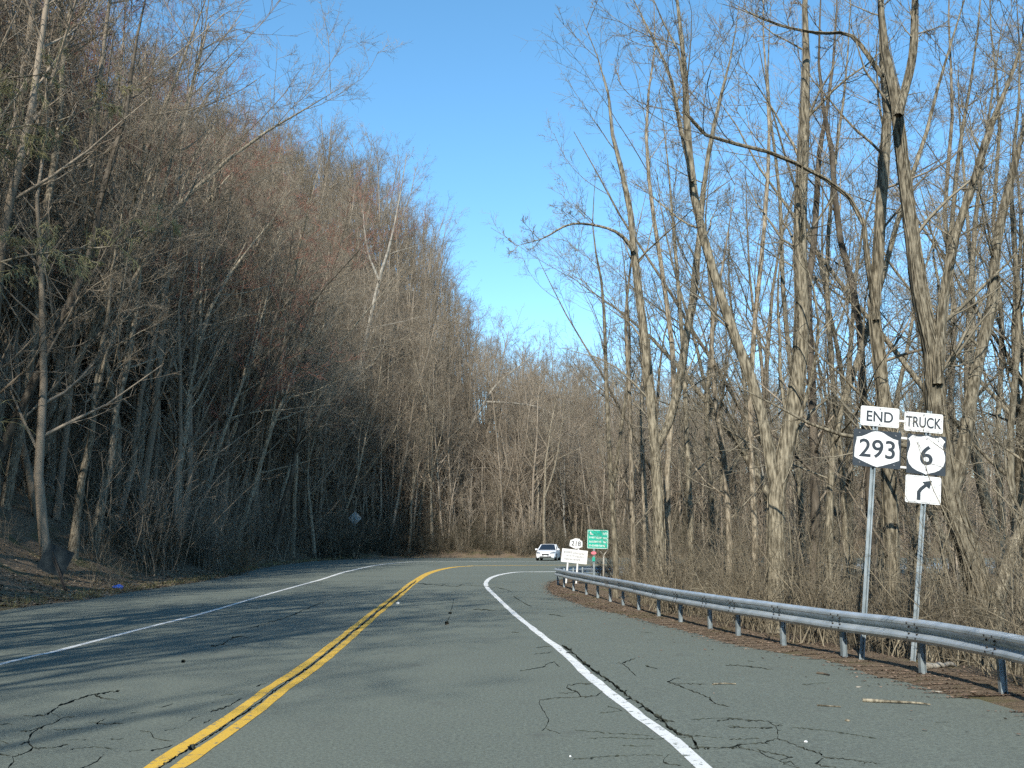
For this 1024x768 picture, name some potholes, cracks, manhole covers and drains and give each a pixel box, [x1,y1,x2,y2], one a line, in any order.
crack [210,601,325,647]
crack [0,674,273,768]
crack [520,632,881,768]
